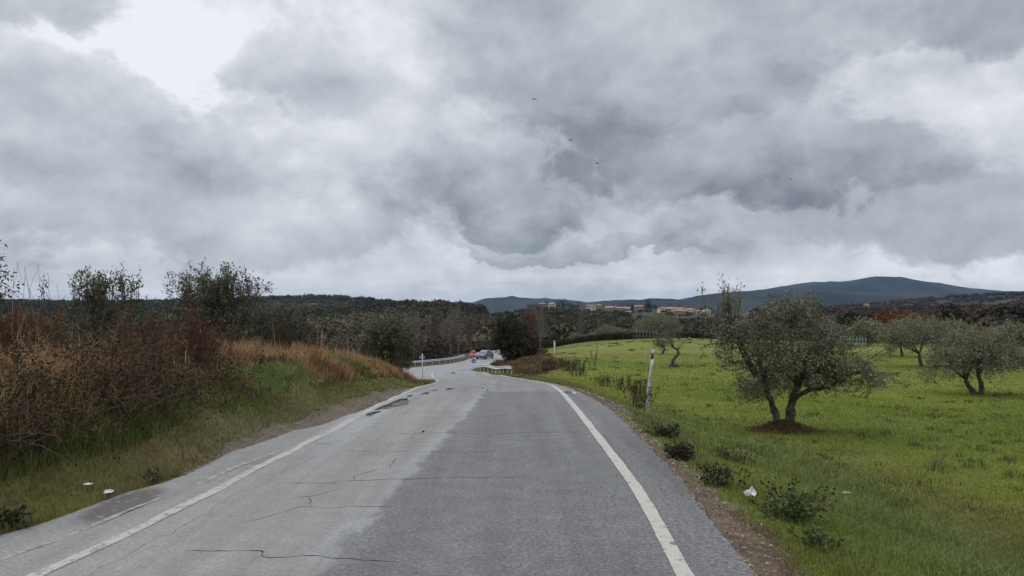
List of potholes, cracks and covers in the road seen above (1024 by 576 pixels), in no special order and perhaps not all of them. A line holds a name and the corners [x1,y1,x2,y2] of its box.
crack [90,490,397,575]
crack [243,411,523,522]
pothole [375,398,409,410]
